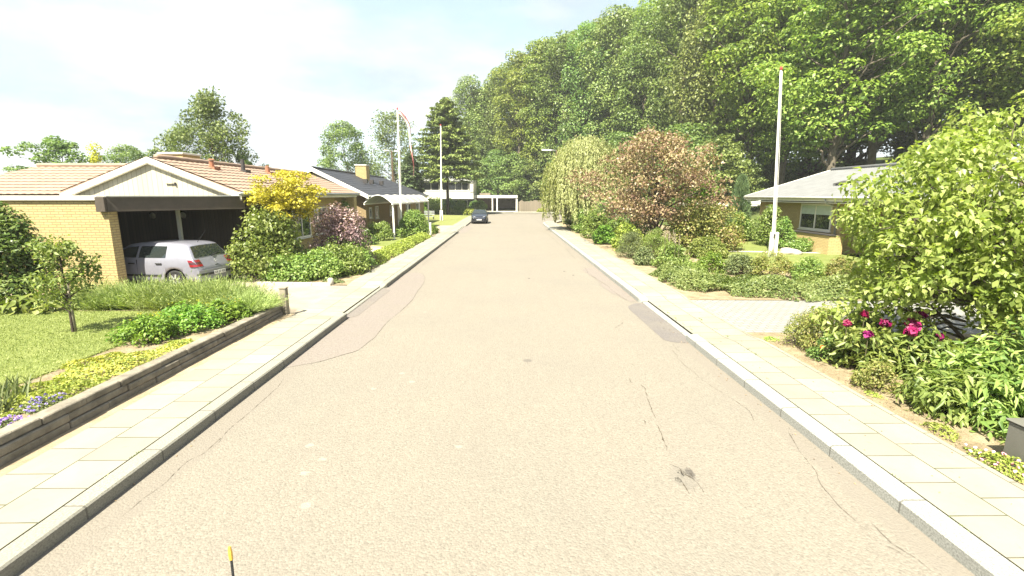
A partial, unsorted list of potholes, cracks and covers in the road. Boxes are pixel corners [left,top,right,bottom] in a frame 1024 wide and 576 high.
crack [788,431,927,567]
